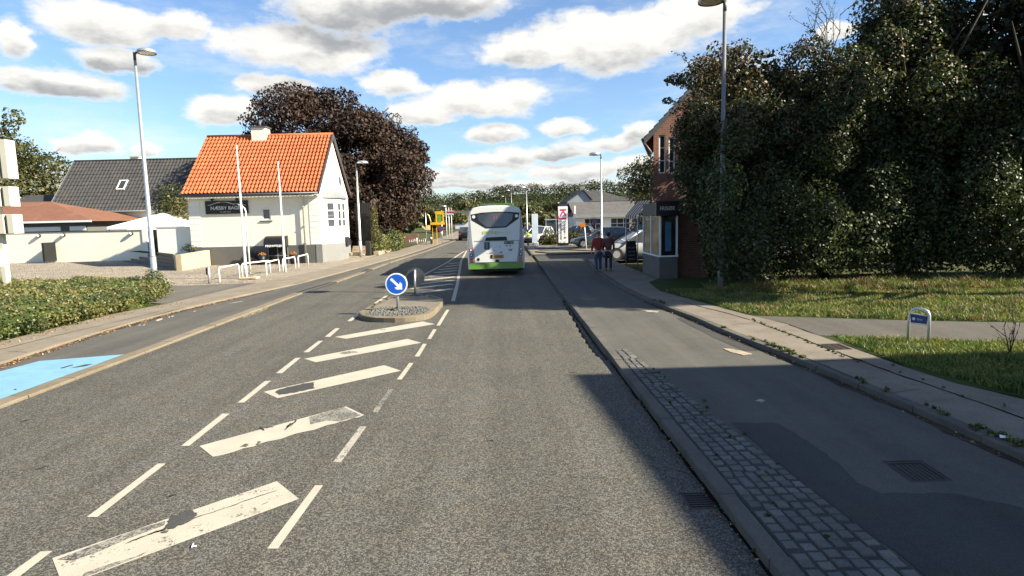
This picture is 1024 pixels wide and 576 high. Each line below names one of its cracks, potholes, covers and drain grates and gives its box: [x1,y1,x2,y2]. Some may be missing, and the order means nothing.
drain grate [680,493,718,510]
